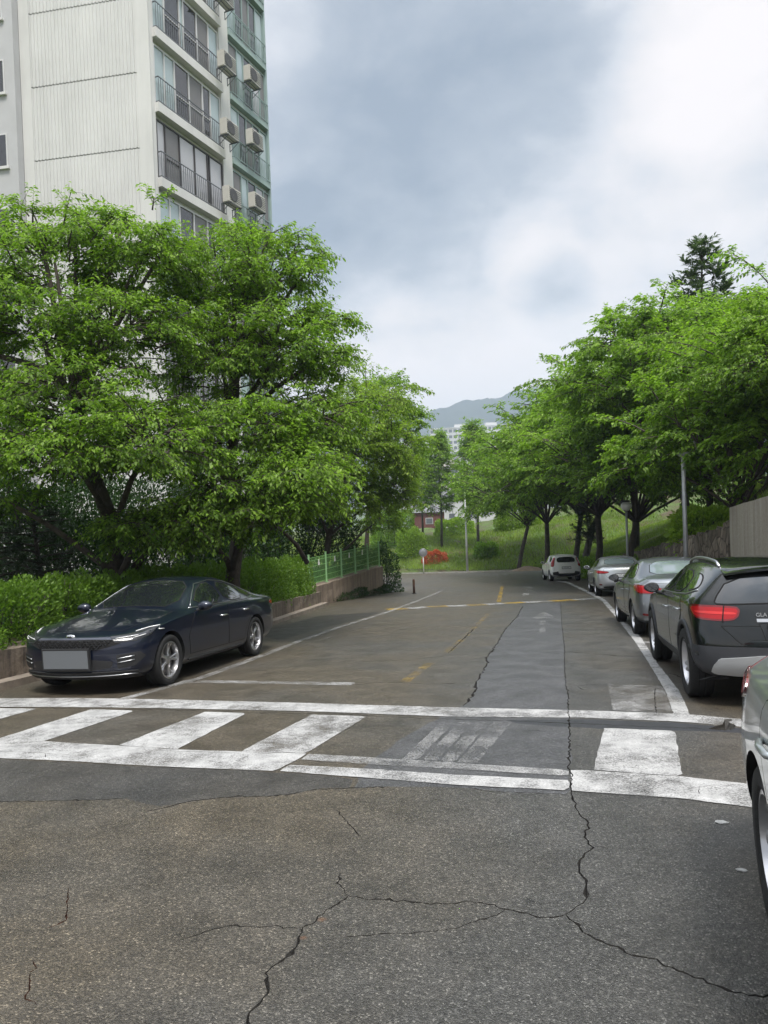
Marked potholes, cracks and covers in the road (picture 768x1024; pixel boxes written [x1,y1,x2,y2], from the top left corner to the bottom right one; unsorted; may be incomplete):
crack [24,960,37,1005]
crack [181,602,768,1024]
crack [49,887,69,928]
